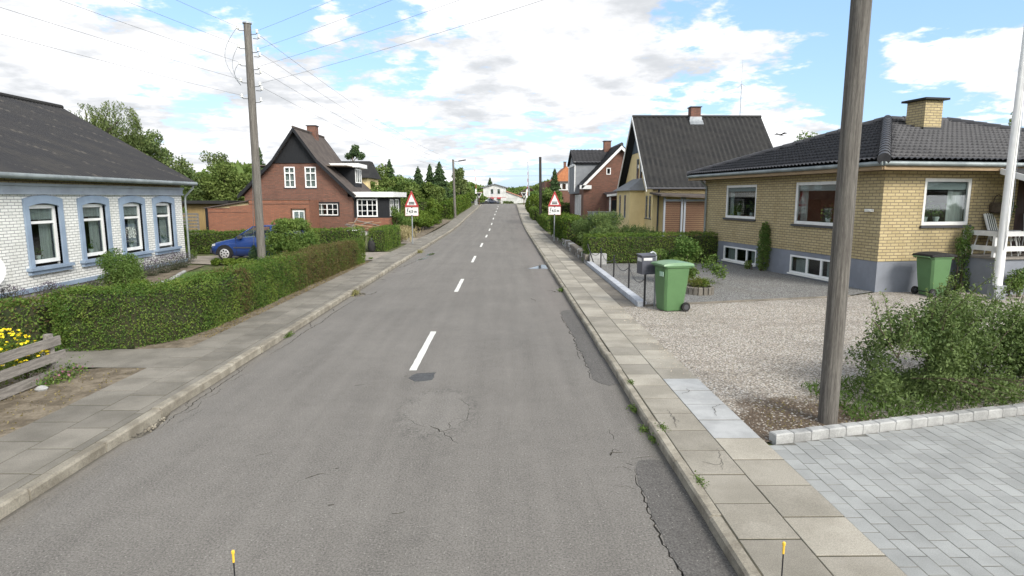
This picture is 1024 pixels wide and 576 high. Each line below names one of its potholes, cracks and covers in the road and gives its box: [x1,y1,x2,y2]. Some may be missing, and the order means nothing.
crack [405,399,470,444]
crack [156,364,249,430]
